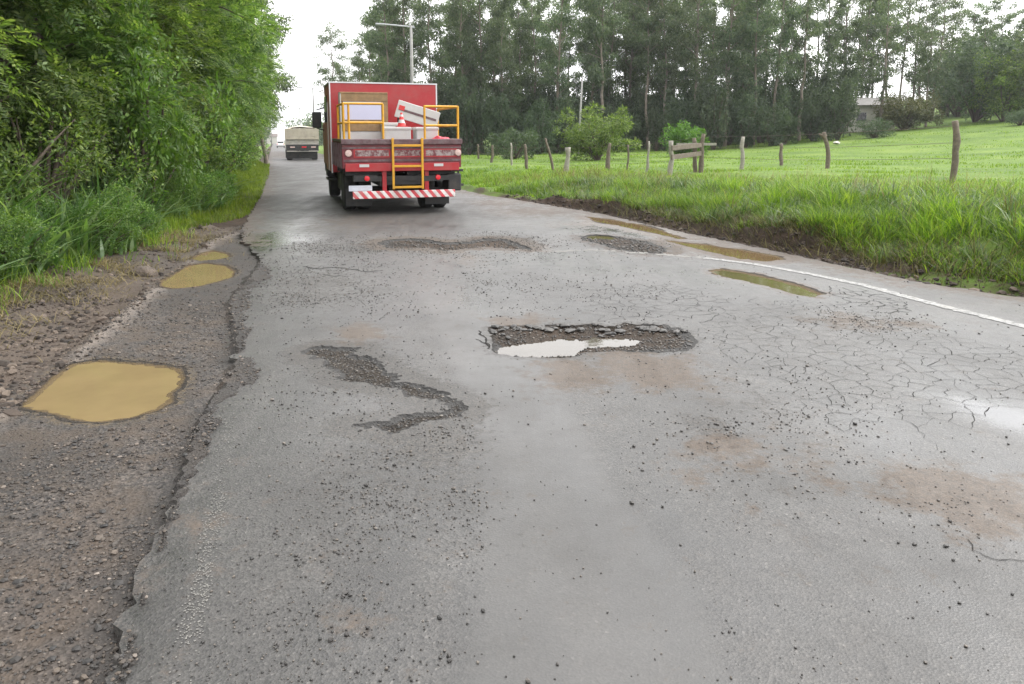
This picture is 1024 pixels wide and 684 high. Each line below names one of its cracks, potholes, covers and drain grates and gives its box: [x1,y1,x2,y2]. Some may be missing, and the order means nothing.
pothole [16,358,190,424]
pothole [578,234,667,254]
pothole [157,263,238,289]
crack [582,284,736,322]
pothole [378,238,533,251]
pothole [488,322,698,358]
pothole [300,345,469,435]
crack [698,286,1024,450]
pothole [708,268,827,298]
pothole [189,250,232,261]
